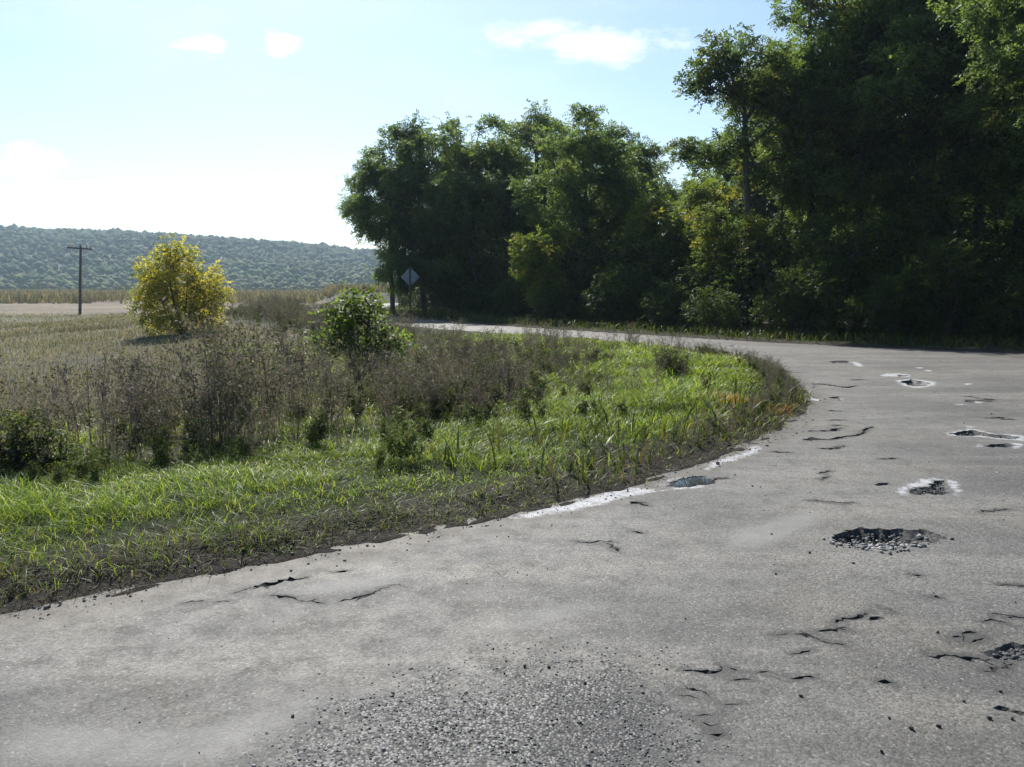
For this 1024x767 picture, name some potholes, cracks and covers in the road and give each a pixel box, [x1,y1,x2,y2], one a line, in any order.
crack [783,612,868,654]
pothole [948,430,1020,439]
crack [772,410,873,453]
pothole [822,527,954,555]
pothole [909,480,955,496]
crack [678,665,768,737]
crack [186,577,407,604]
crack [925,613,1024,673]
crack [578,531,645,552]
pothole [978,642,1024,663]
